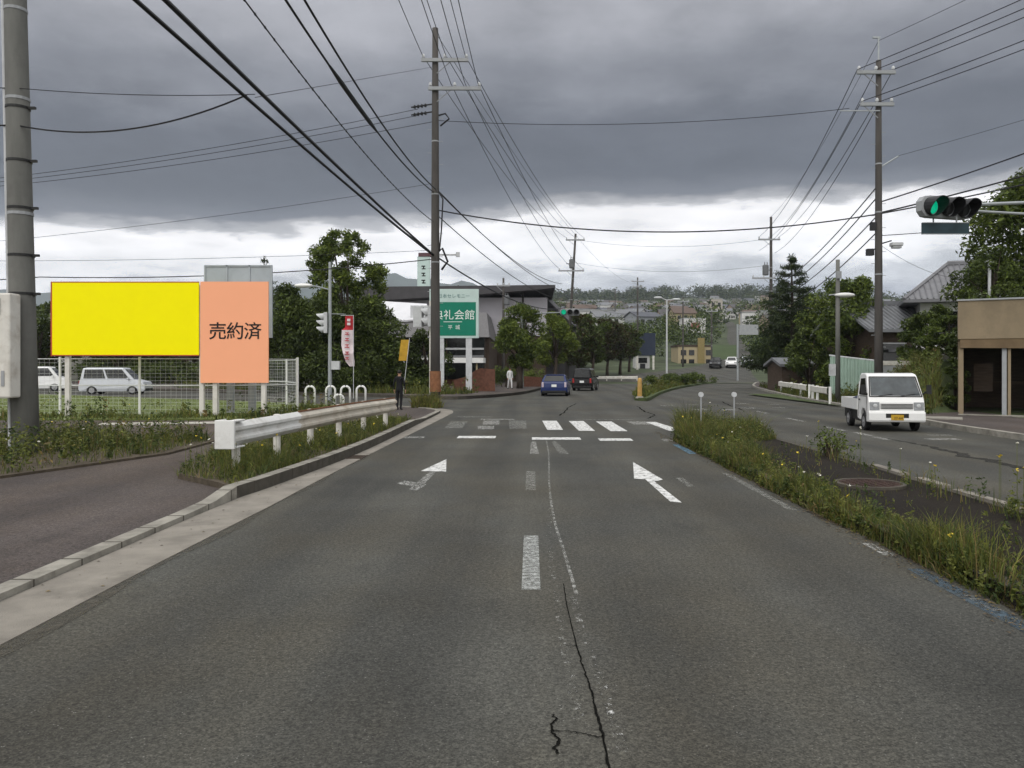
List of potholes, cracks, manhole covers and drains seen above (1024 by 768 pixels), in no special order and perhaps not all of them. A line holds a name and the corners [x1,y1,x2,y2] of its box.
manhole cover [835,478,907,491]
crack [550,584,611,768]
